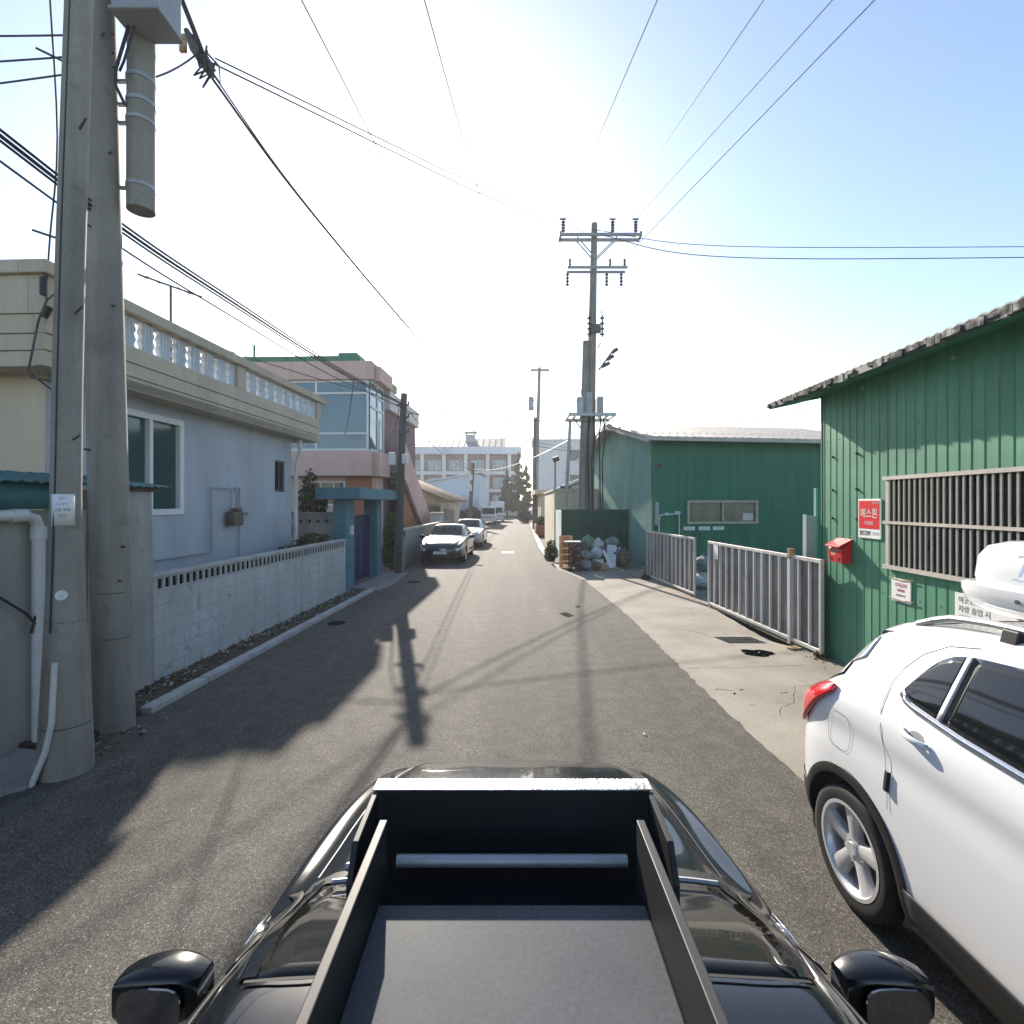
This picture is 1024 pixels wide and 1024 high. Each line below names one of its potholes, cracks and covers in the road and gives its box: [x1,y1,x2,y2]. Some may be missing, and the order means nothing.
pothole [741,649,775,657]
